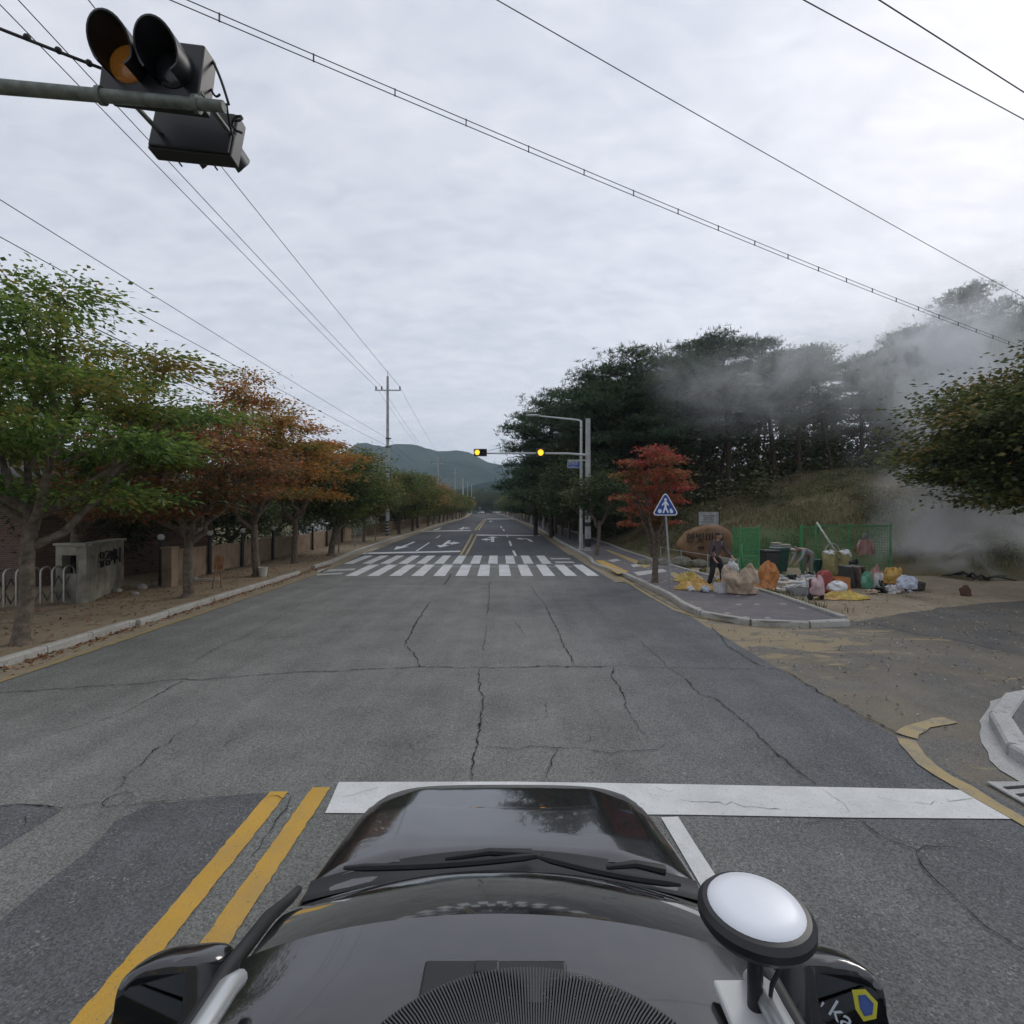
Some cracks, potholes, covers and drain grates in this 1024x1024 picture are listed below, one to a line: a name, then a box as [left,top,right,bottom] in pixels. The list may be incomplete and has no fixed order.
crack [0,715,202,827]
crack [659,788,1024,949]
crack [252,791,296,856]
drain grate [987,781,1024,804]
crack [8,586,900,811]
